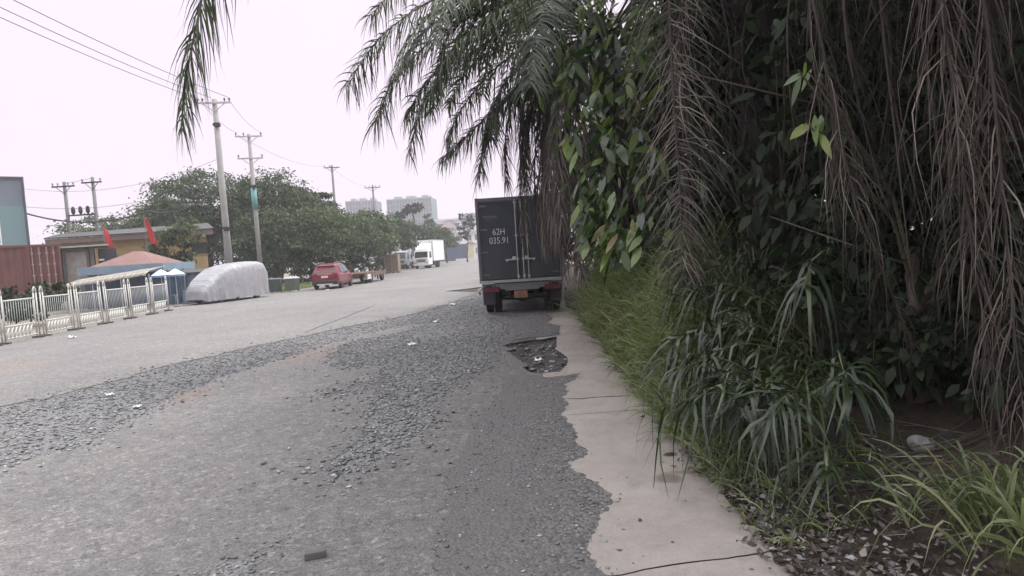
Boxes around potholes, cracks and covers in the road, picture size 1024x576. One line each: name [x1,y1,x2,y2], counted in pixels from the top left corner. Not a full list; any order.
pothole [503,337,568,374]
